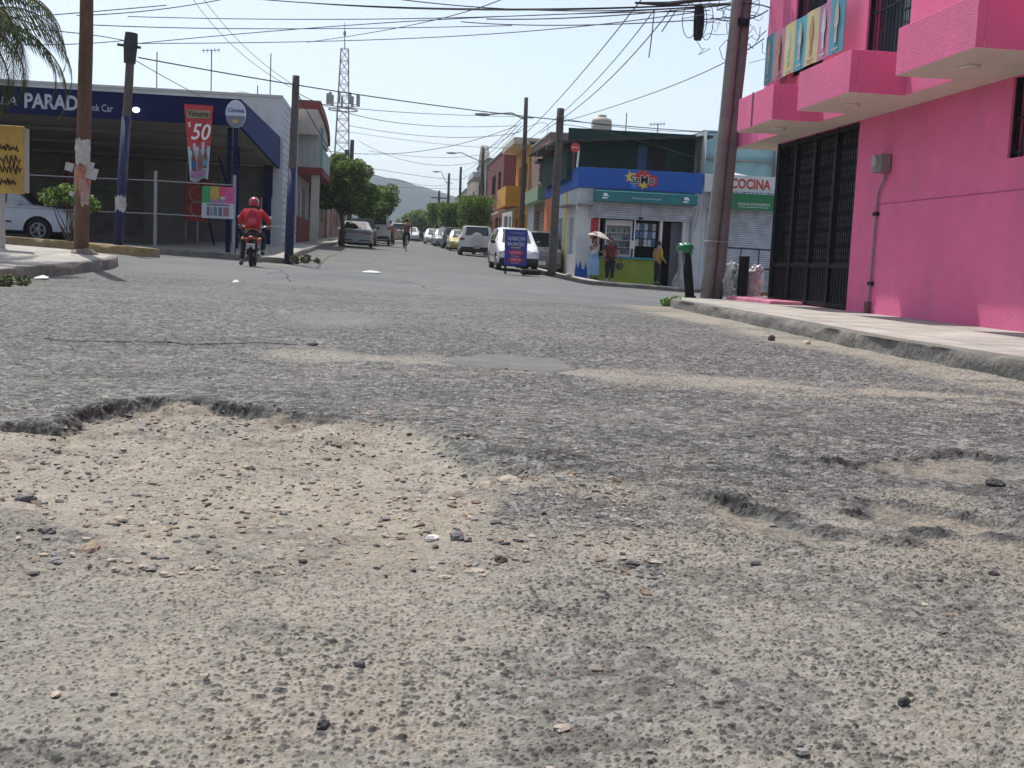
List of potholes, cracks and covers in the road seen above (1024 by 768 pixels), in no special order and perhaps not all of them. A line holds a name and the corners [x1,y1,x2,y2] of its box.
pothole [661,491,913,555]
pothole [810,449,1024,492]
pothole [0,396,629,584]
pothole [841,498,1024,537]
